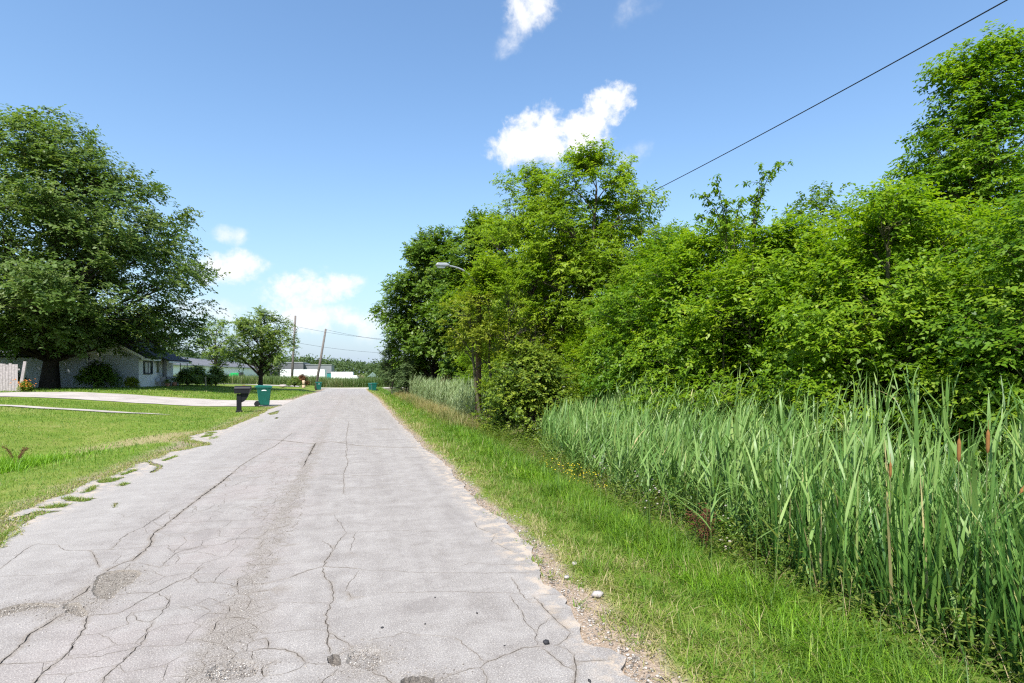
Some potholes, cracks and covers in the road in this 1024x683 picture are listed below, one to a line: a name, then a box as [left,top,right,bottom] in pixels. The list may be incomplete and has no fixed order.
pothole [91,570,142,600]
crack [0,423,566,683]
pothole [205,659,260,681]
pothole [327,654,341,667]
